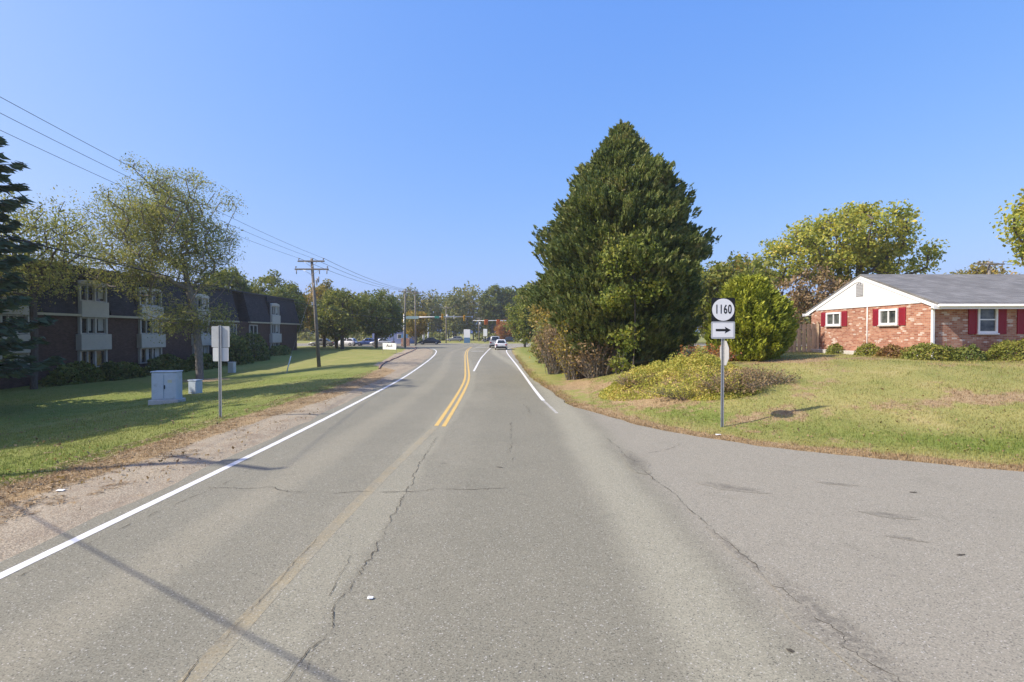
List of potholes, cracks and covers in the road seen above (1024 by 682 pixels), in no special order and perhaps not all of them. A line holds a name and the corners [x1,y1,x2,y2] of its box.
crack [284,437,489,682]
